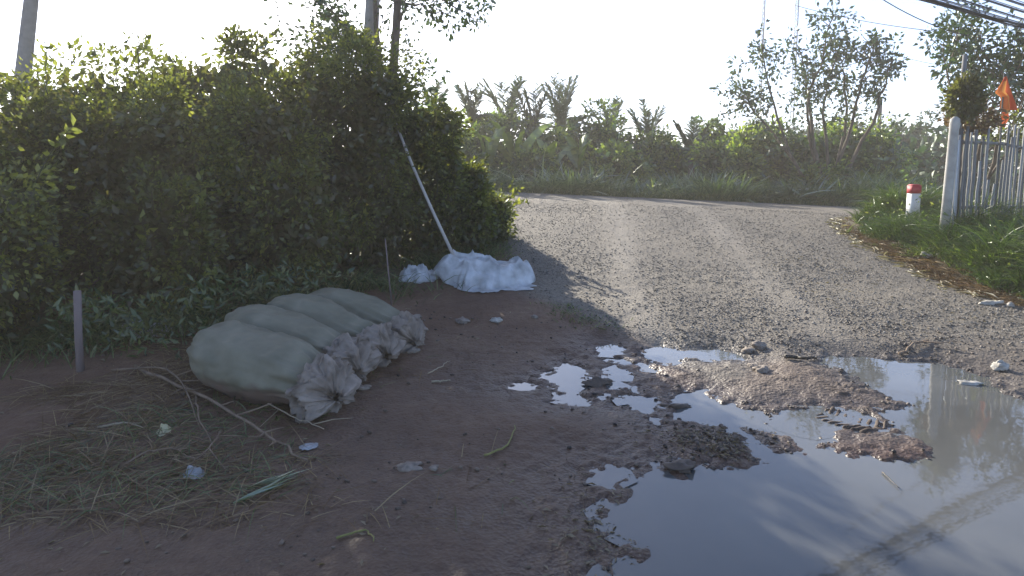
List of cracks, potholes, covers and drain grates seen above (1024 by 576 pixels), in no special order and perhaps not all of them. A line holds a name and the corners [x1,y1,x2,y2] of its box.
pothole [641,346,750,366]
pothole [583,354,1024,576]
